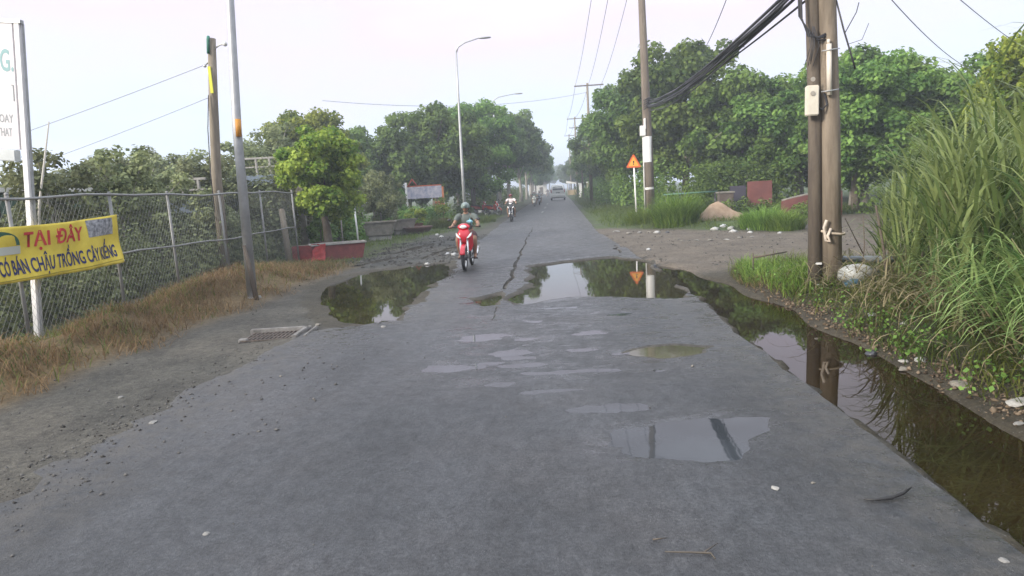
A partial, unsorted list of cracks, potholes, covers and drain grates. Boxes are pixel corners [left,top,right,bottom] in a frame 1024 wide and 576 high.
crack [503,228,533,289]
pothole [467,291,506,306]
pothole [503,256,690,305]
pothole [321,264,452,325]
drain grate [238,325,318,344]
pothole [620,344,714,359]
